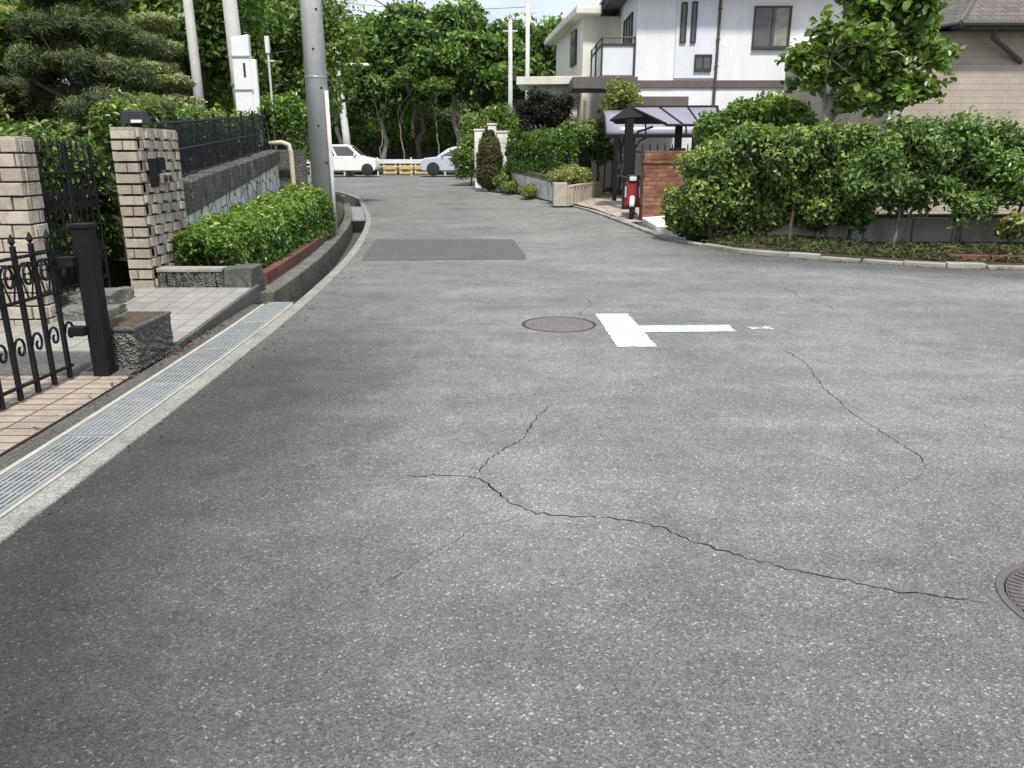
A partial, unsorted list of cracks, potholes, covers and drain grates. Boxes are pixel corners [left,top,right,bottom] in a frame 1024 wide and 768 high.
crack [375,405,1001,603]
drain grate [149,348,233,383]
drain grate [67,383,185,436]
drain grate [241,302,294,322]
manhole cover [522,317,596,333]
crack [784,350,928,495]
drain grate [0,436,112,515]
manhole cover [995,562,1024,620]
drain grate [202,322,268,348]
